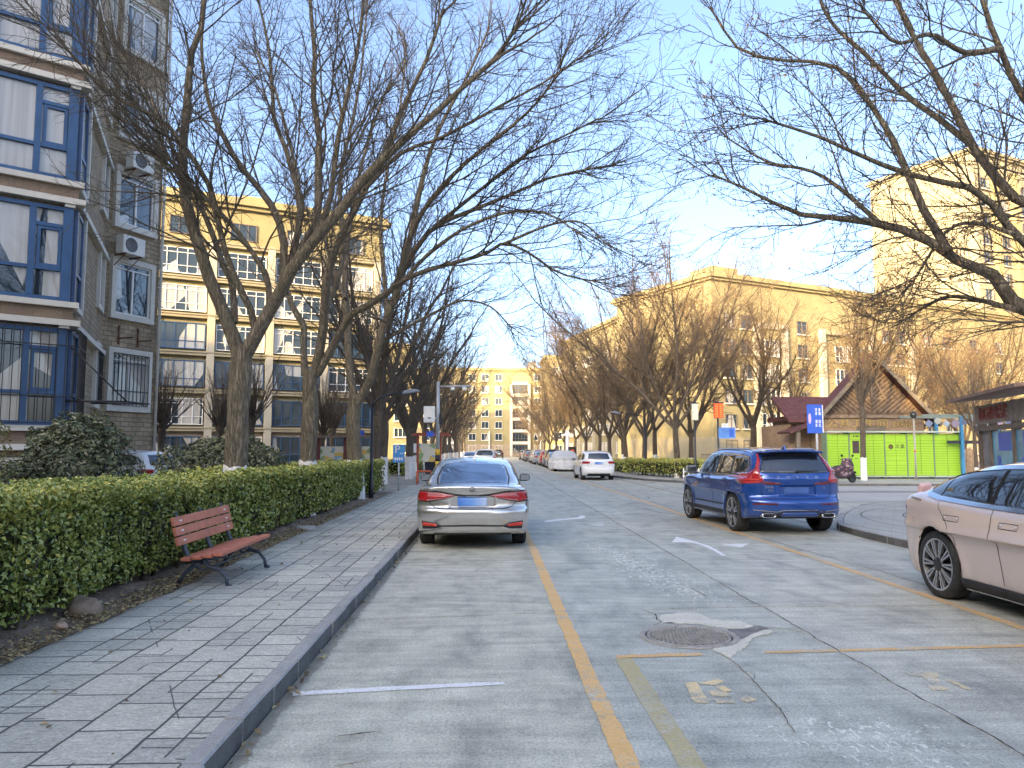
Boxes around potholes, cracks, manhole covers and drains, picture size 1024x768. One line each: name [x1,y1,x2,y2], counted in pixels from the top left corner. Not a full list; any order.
crack [504,458,1024,759]
manhole cover [640,625,739,649]
